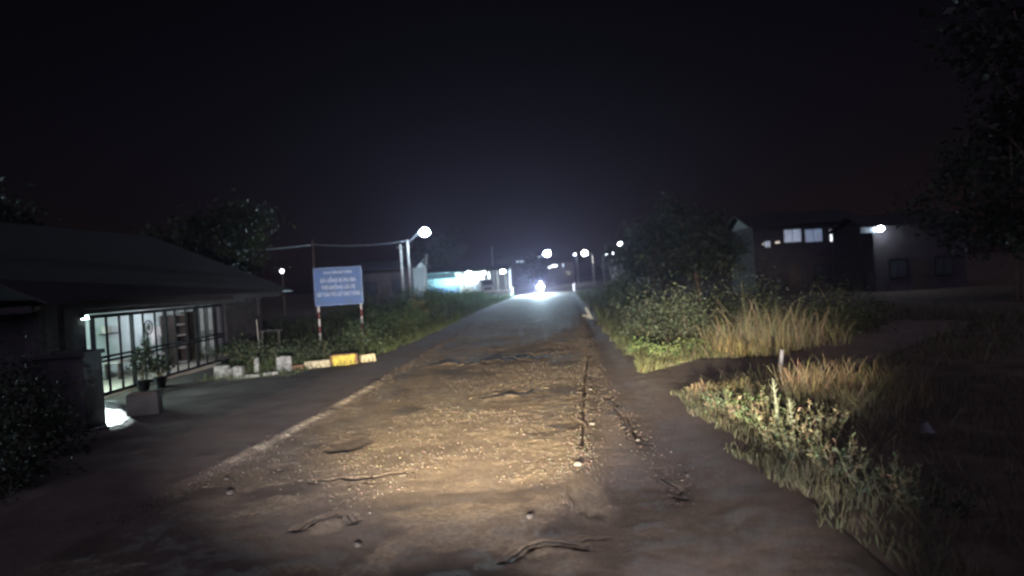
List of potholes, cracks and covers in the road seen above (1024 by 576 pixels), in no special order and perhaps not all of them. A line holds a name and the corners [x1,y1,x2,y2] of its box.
crack [656,469,691,499]
crack [295,512,358,530]
pothole [315,434,385,457]
crack [315,469,406,485]
crack [500,536,610,562]
crack [369,339,649,448]
